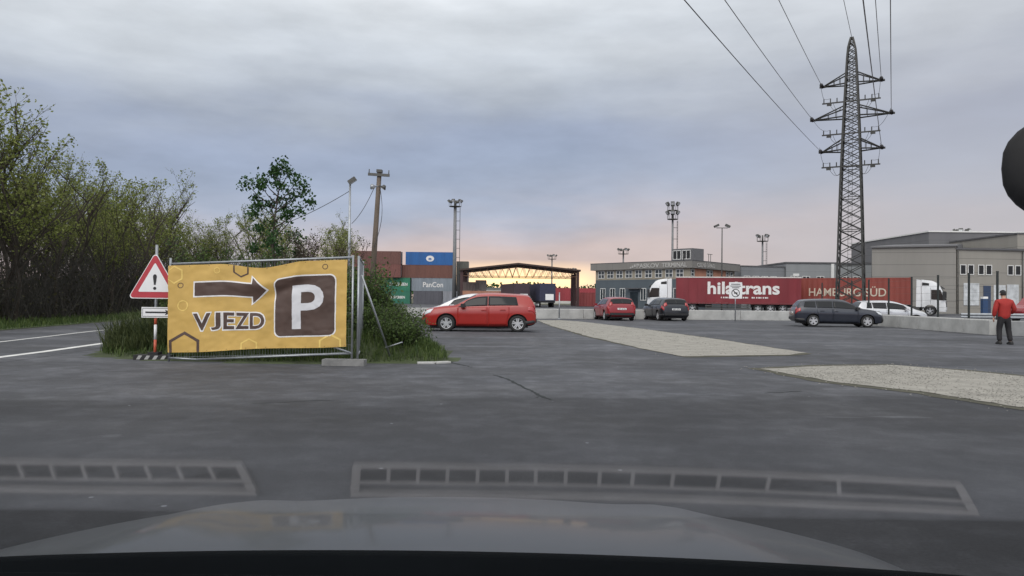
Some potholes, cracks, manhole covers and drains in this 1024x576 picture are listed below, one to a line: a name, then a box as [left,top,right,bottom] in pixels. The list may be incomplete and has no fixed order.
crack [496,375,551,400]
